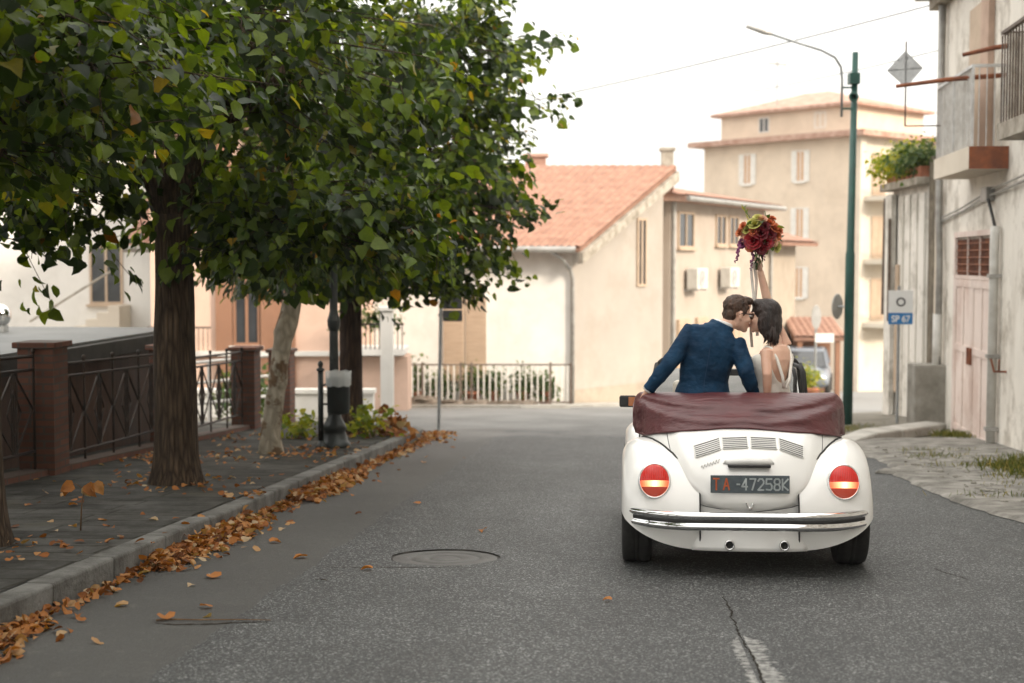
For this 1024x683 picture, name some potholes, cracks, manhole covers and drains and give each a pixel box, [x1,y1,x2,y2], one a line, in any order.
crack [722,594,765,683]
manhole cover [391,549,500,566]
